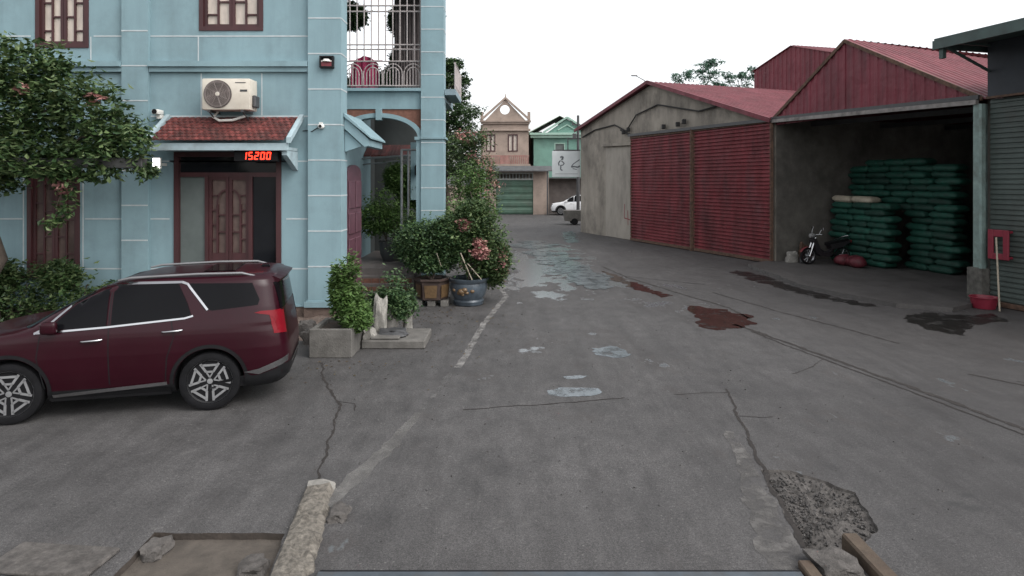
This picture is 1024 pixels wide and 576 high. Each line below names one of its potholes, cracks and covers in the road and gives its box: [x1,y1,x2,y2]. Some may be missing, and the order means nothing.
pothole [761,469,878,550]
crack [314,362,356,479]
crack [463,387,808,548]
